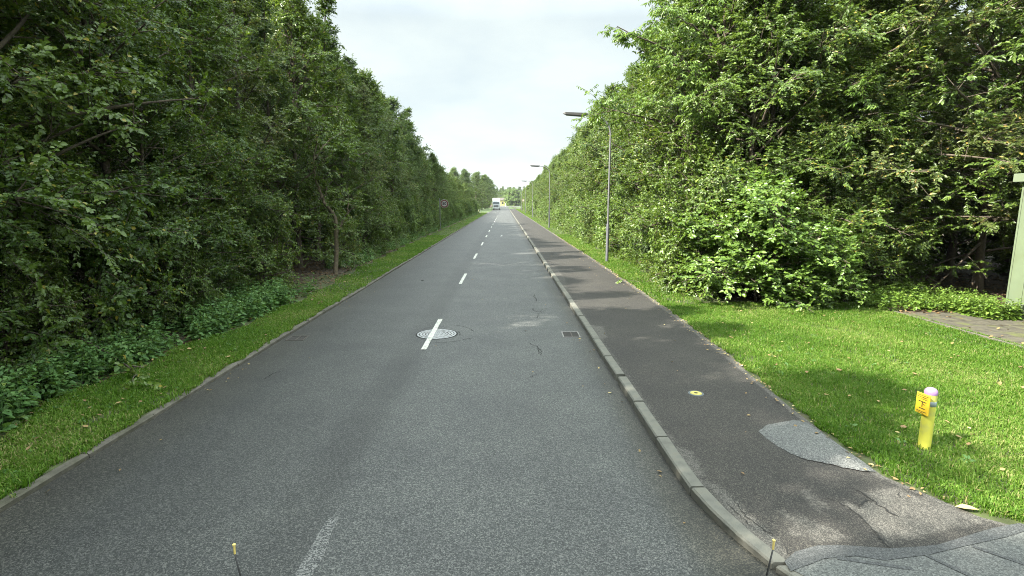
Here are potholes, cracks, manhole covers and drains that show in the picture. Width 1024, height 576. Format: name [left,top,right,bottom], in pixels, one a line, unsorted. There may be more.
manhole cover [416,329,458,339]
crack [825,488,901,548]
